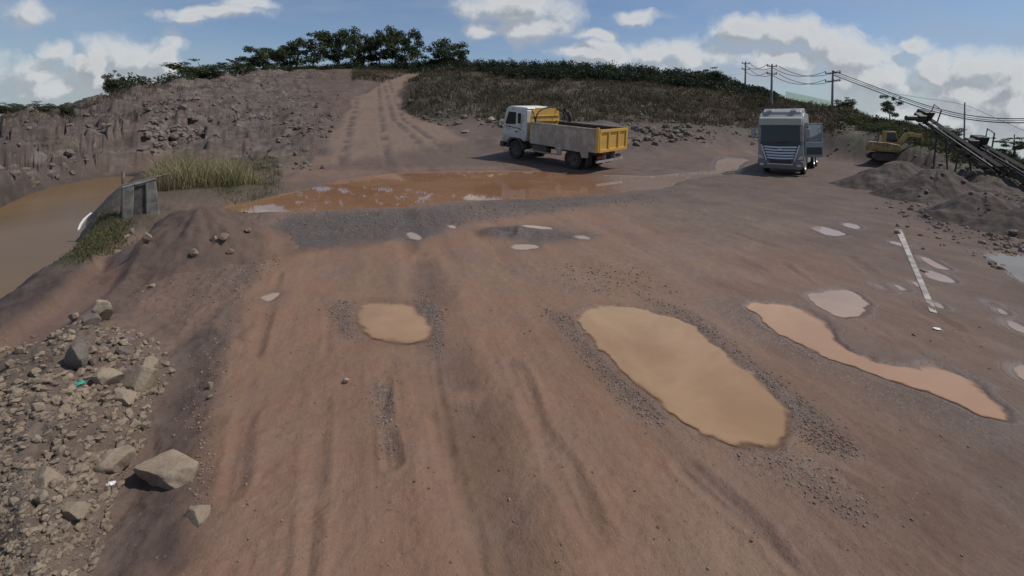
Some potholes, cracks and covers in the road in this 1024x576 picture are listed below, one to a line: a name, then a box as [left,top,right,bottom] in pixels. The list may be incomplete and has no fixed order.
pothole [981,251,1024,285]
pothole [797,286,879,322]
pothole [344,297,442,349]
pothole [570,301,808,459]
pothole [738,299,1024,426]
pothole [506,241,545,252]
pothole [836,222,866,231]
pothole [912,254,959,272]
pothole [805,225,852,238]
pothole [917,266,963,285]
